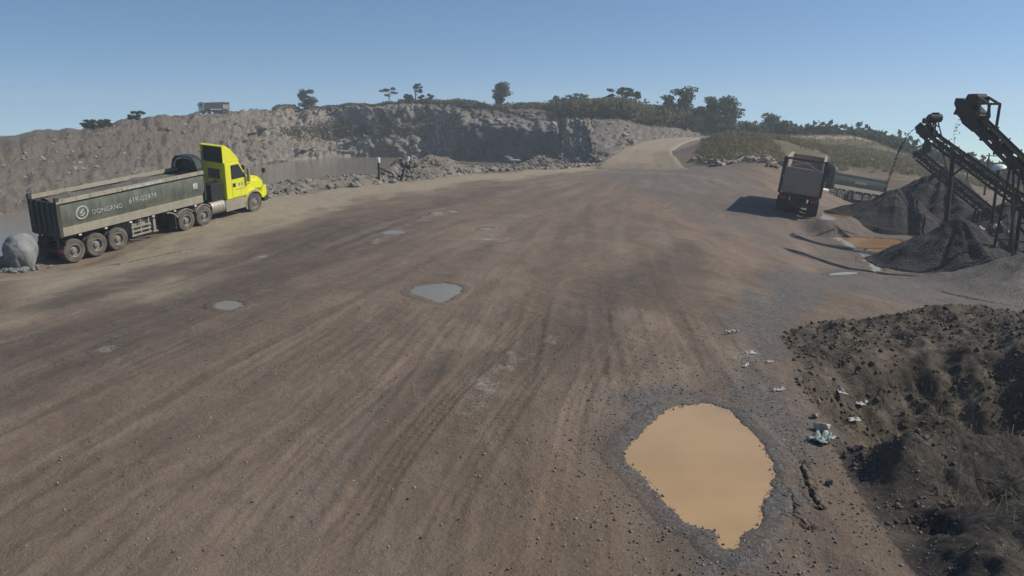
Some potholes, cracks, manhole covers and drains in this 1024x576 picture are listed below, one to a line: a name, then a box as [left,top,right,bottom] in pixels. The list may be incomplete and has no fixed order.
pothole [203,298,256,312]
crack [781,462,826,530]
pothole [400,280,474,305]
pothole [600,396,806,565]
pothole [826,220,908,275]
